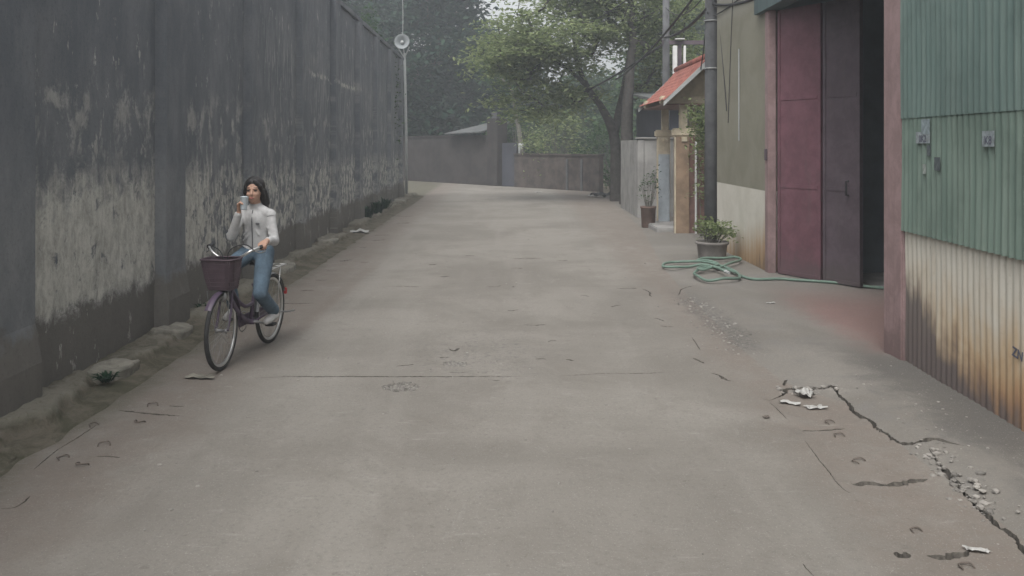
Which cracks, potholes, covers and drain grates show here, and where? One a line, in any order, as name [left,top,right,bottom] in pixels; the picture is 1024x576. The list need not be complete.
pothole [381,382,420,392]
crack [765,380,1024,560]
